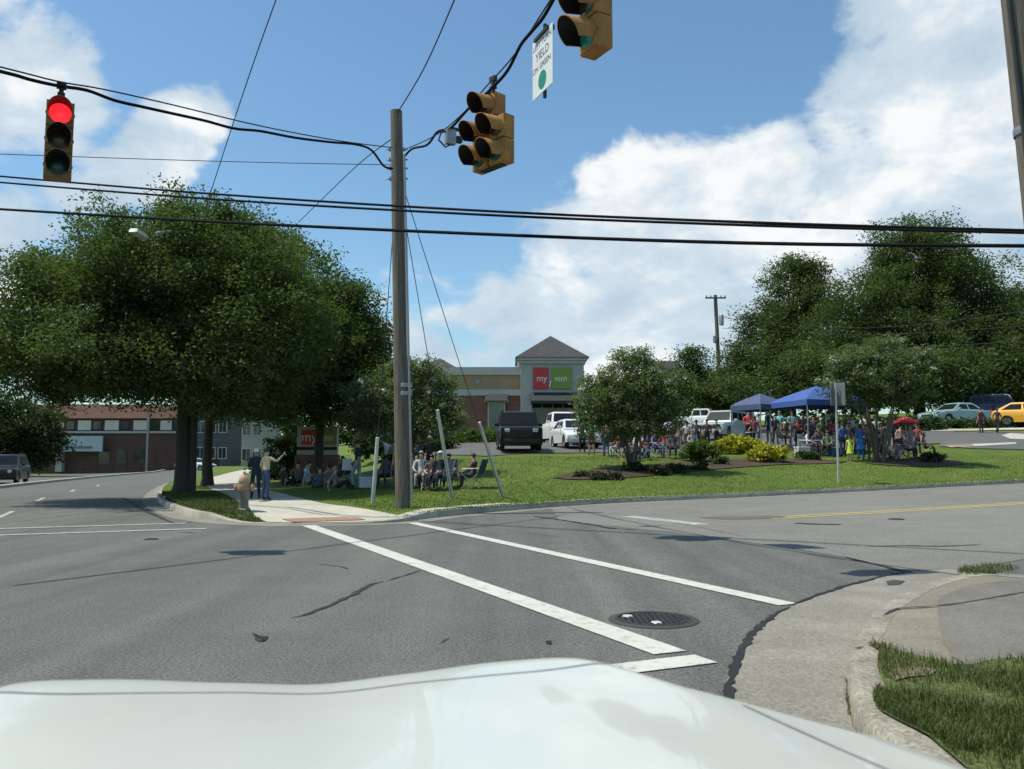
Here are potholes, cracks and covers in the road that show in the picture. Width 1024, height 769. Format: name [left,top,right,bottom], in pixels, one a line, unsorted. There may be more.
manhole cover [608,611,700,629]
crack [290,564,420,618]
